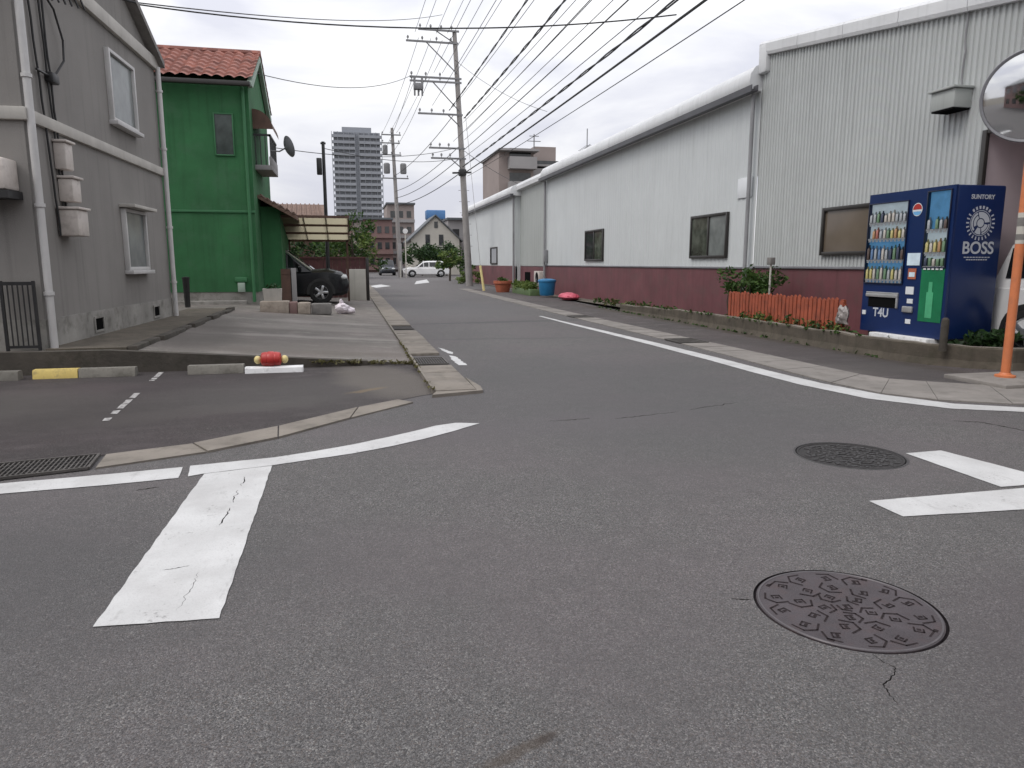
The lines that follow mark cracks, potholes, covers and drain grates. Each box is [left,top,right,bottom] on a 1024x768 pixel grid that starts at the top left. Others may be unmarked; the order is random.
crack [874,655,898,704]
manhole cover [753,570,950,654]
manhole cover [793,442,910,470]
drain grate [414,357,449,366]
drain grate [0,453,101,480]
